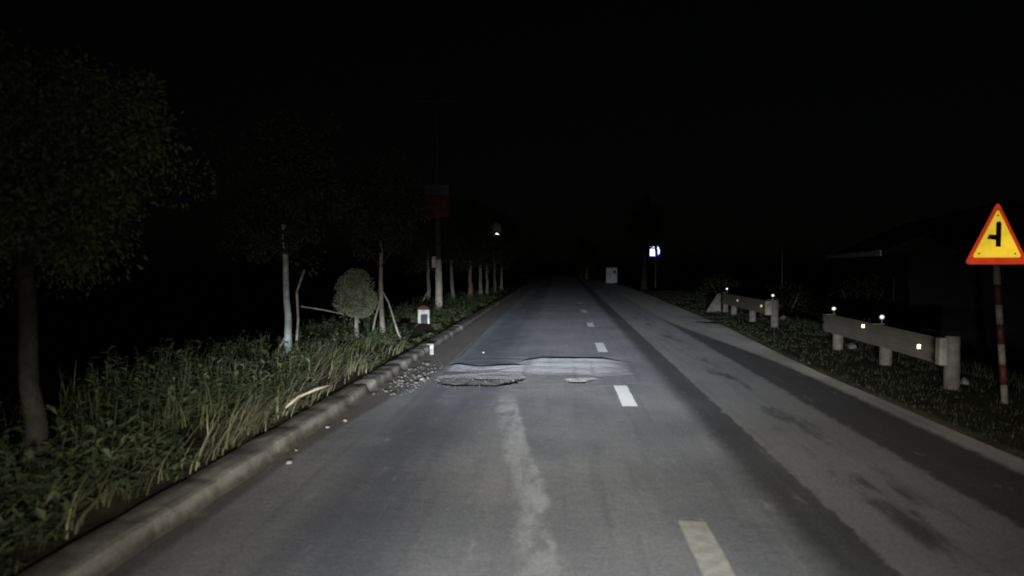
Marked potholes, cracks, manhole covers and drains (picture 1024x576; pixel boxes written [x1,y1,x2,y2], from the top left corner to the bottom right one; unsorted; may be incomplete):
pothole [433,372,527,387]
